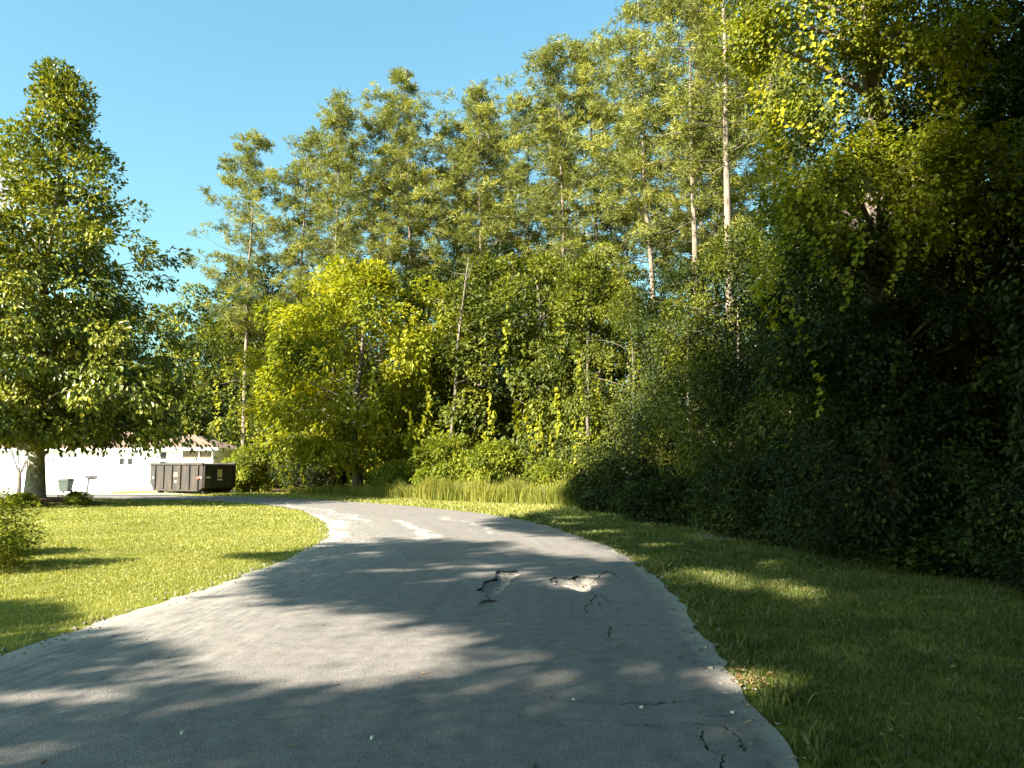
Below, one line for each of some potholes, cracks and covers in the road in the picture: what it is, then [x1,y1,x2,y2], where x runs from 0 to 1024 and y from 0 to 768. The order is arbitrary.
pothole [476,570,521,595]
crack [516,689,748,768]
crack [584,570,638,638]
pothole [548,576,599,592]
